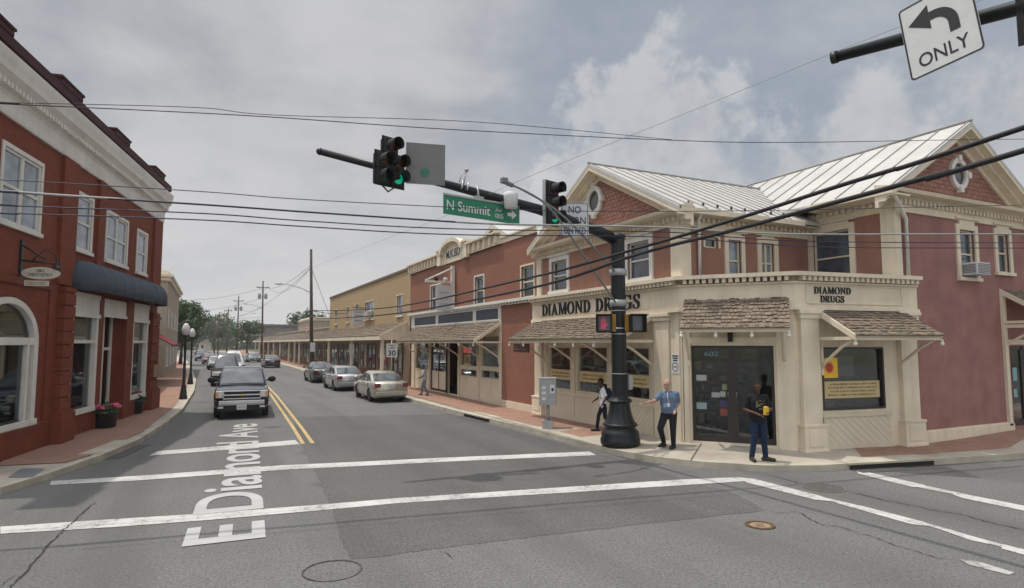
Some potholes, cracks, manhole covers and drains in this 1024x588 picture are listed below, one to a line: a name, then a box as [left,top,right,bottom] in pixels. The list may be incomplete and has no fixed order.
drain grate [833,454,946,473]
manhole cover [801,483,847,493]
drain grate [458,411,503,423]
manhole cover [745,520,776,530]
manhole cover [302,560,362,582]
crack [774,511,946,559]
crack [3,503,95,588]
